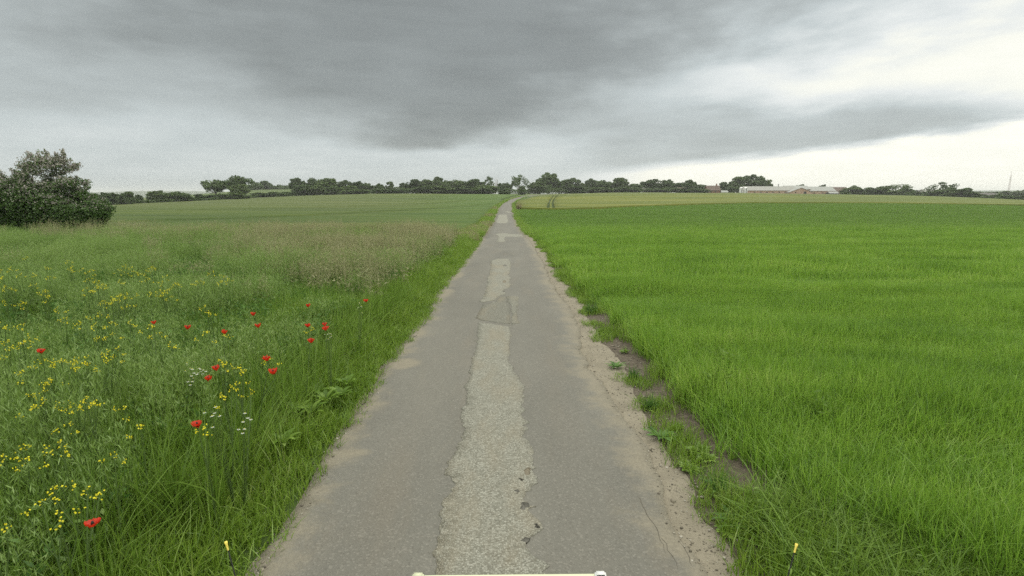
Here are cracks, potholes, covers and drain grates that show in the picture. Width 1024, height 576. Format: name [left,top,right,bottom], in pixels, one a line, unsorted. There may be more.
crack [639,498,693,569]
